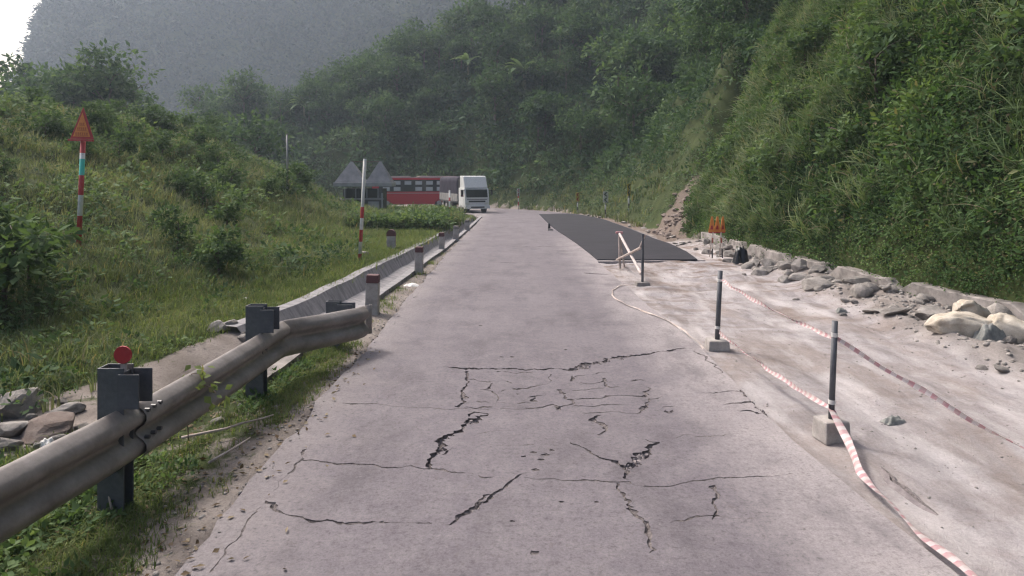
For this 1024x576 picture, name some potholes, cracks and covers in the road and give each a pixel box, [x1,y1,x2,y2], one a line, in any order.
crack [880,466,939,515]
crack [209,348,791,573]
